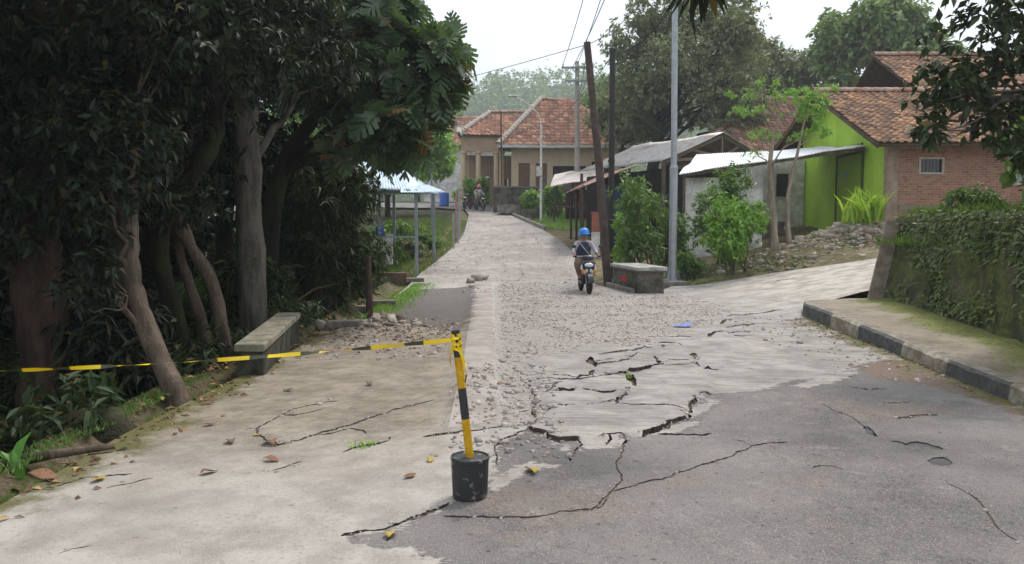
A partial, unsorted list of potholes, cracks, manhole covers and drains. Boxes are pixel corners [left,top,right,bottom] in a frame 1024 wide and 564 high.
crack [64,279,1020,552]
pothole [927,457,953,466]
